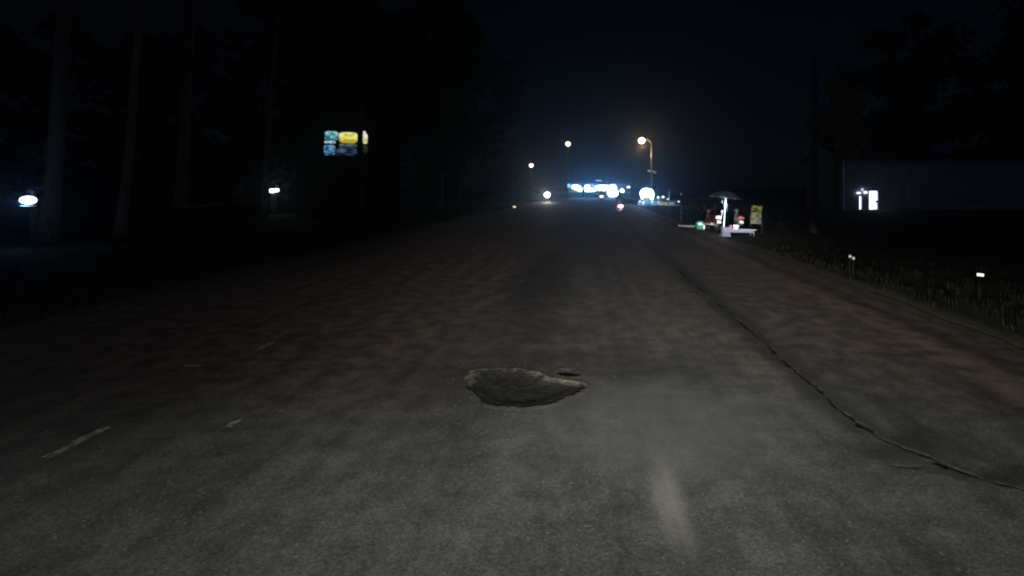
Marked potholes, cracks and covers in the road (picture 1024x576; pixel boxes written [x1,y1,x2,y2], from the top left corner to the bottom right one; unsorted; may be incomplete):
crack [672,266,1024,494]
pothole [458,366,594,410]
